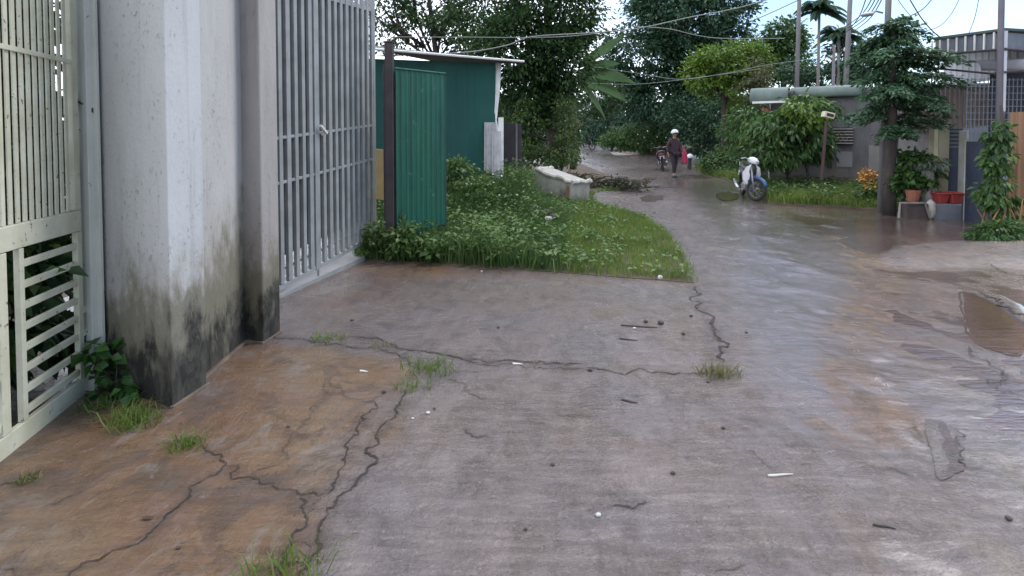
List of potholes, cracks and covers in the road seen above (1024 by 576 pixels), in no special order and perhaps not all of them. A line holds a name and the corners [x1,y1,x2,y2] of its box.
crack [457,285,730,375]
crack [68,365,406,576]
pothole [958,291,1024,357]
